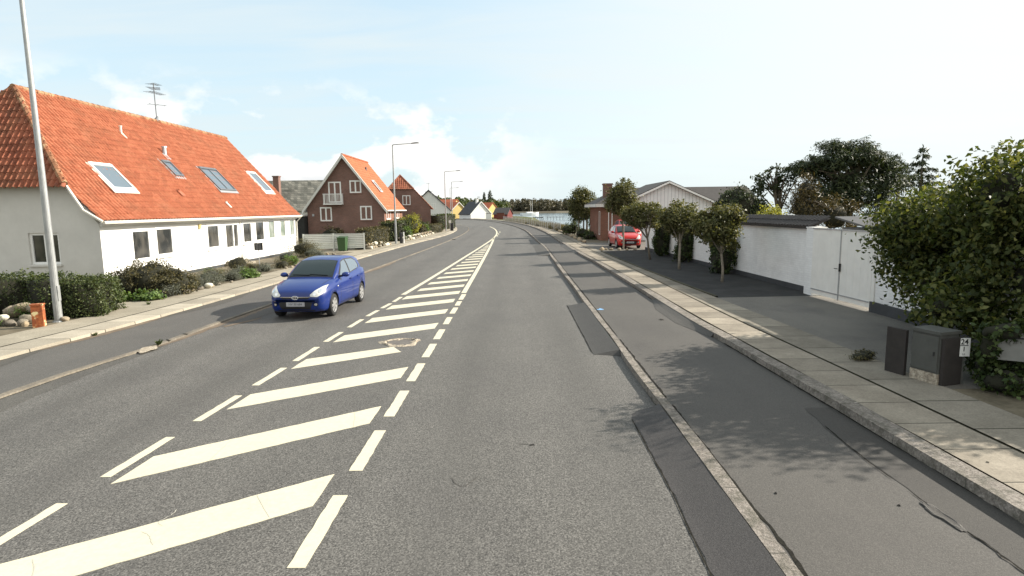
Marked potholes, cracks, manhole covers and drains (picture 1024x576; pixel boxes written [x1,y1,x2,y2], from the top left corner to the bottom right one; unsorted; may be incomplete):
crack [724,343,1020,522]
crack [969,532,1024,572]
manhole cover [378,338,421,347]
